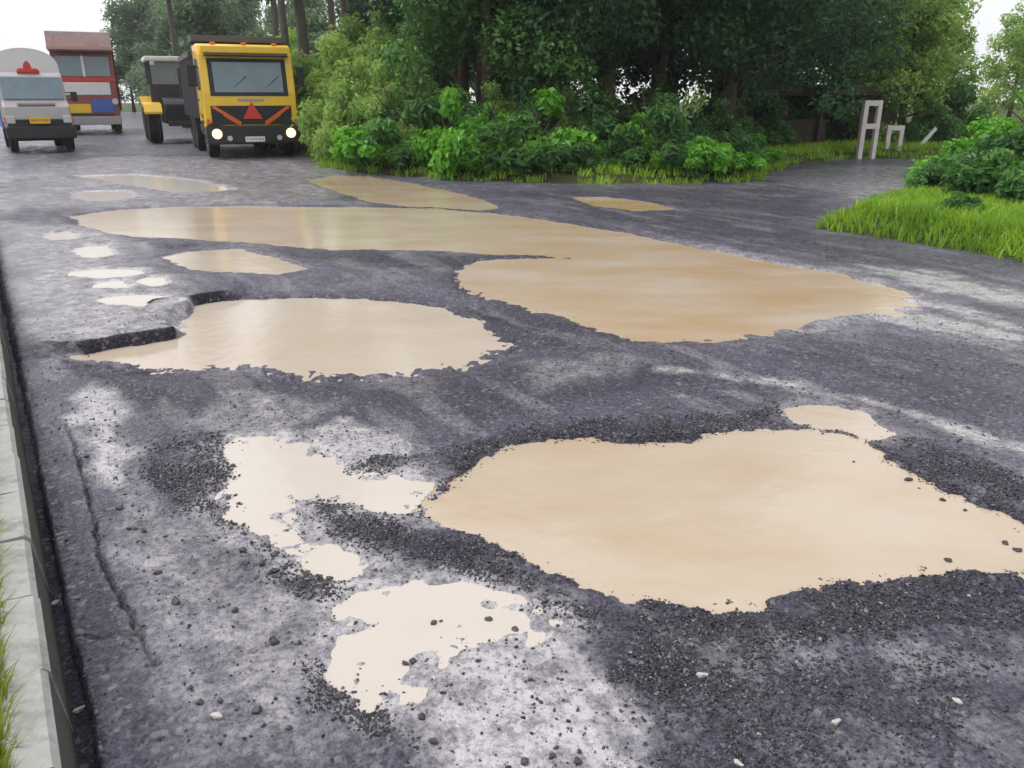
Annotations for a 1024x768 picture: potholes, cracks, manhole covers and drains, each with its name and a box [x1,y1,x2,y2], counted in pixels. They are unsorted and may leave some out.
pothole [16,289,540,384]
crack [62,422,164,668]
pothole [315,573,574,718]
pothole [29,229,88,240]
pothole [562,195,688,211]
pothole [204,430,439,586]
pothole [54,202,960,344]
pothole [298,174,512,211]
pothole [408,422,1024,615]
pothole [70,173,245,193]
pothole [773,399,907,441]
